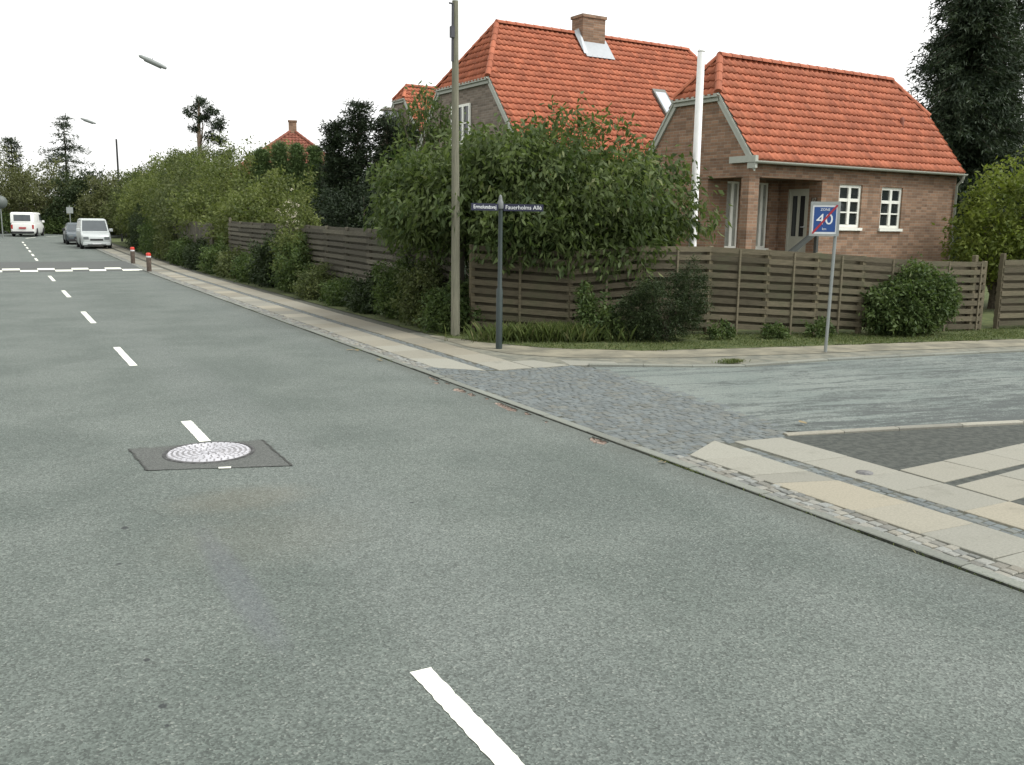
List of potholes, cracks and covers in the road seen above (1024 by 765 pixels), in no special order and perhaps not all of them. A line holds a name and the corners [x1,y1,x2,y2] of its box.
manhole cover [162,441,255,464]
